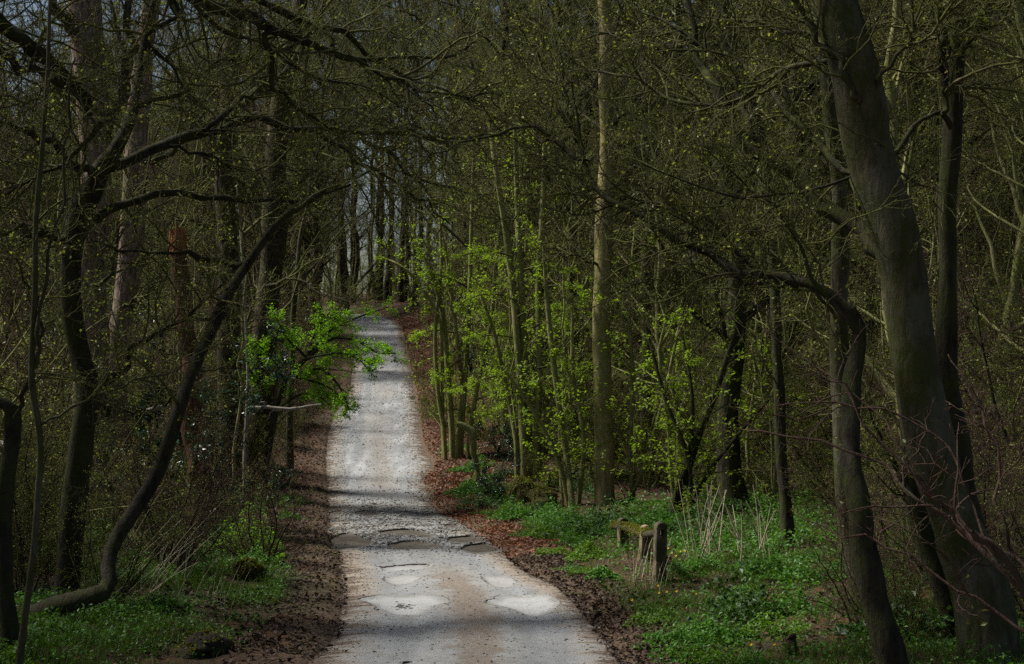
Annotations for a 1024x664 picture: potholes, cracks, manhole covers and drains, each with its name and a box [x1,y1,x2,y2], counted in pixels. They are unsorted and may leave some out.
pothole [377,528,439,539]
pothole [457,542,502,555]
pothole [444,535,485,544]
pothole [330,532,374,551]
pothole [385,540,441,550]
